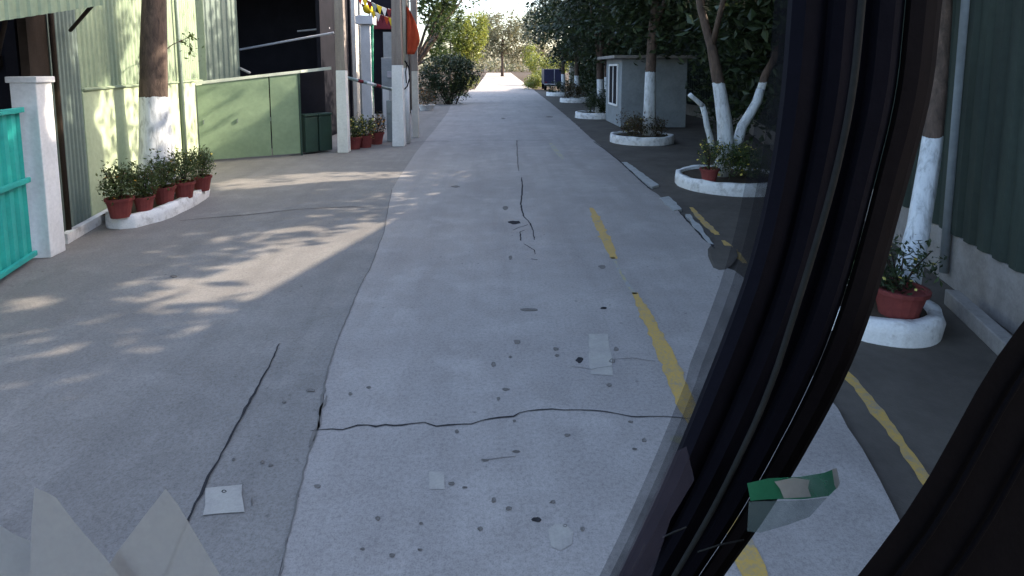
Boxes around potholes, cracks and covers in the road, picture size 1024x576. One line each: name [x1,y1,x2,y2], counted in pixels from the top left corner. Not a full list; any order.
crack [514,177,538,260]
crack [308,395,683,447]
